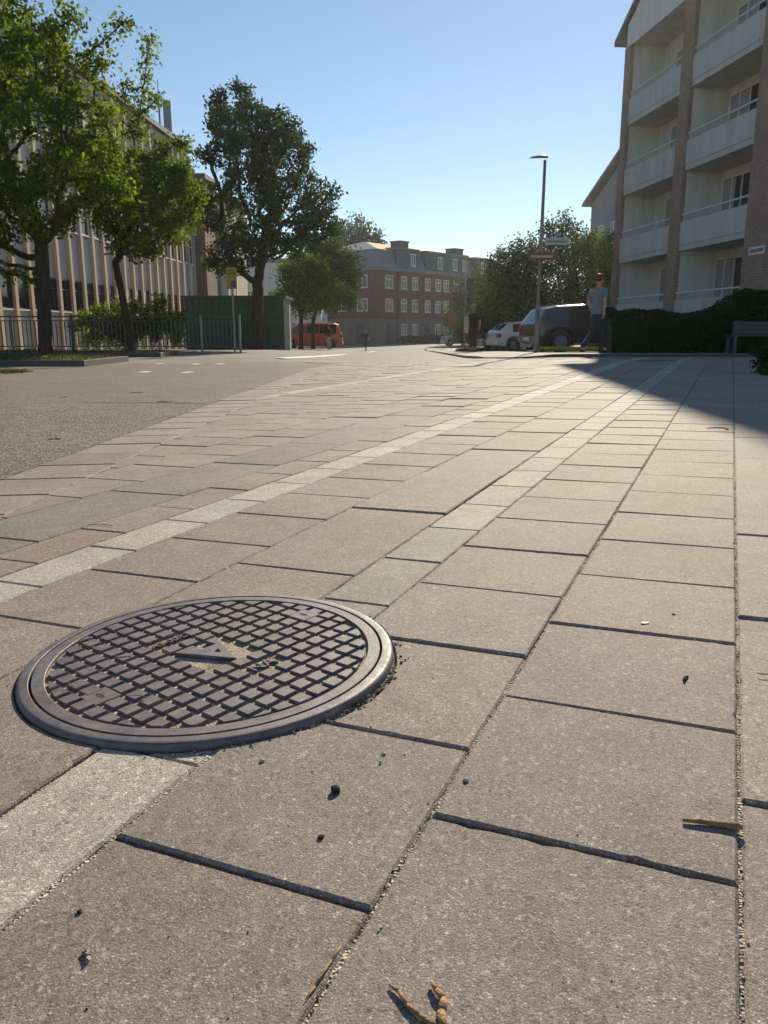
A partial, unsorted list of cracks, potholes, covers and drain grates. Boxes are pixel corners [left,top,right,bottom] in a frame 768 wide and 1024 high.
manhole cover [15,594,394,755]
